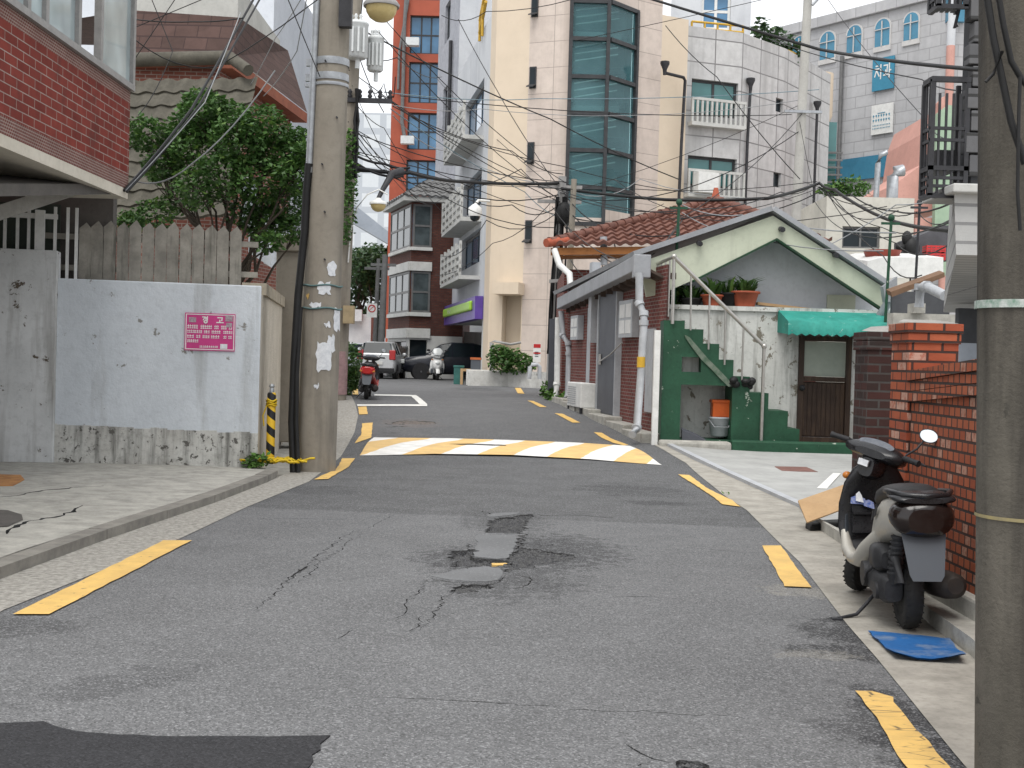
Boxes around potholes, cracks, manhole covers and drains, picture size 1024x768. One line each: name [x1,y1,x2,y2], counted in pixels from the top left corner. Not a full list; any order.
pothole [451,584,494,594]
crack [395,575,532,632]
crack [253,519,386,612]
pothole [676,760,709,768]
crack [3,486,98,534]
pothole [503,533,578,572]
crack [626,744,670,766]
pothole [447,544,510,569]
pothole [485,514,535,534]
crack [375,697,748,719]
